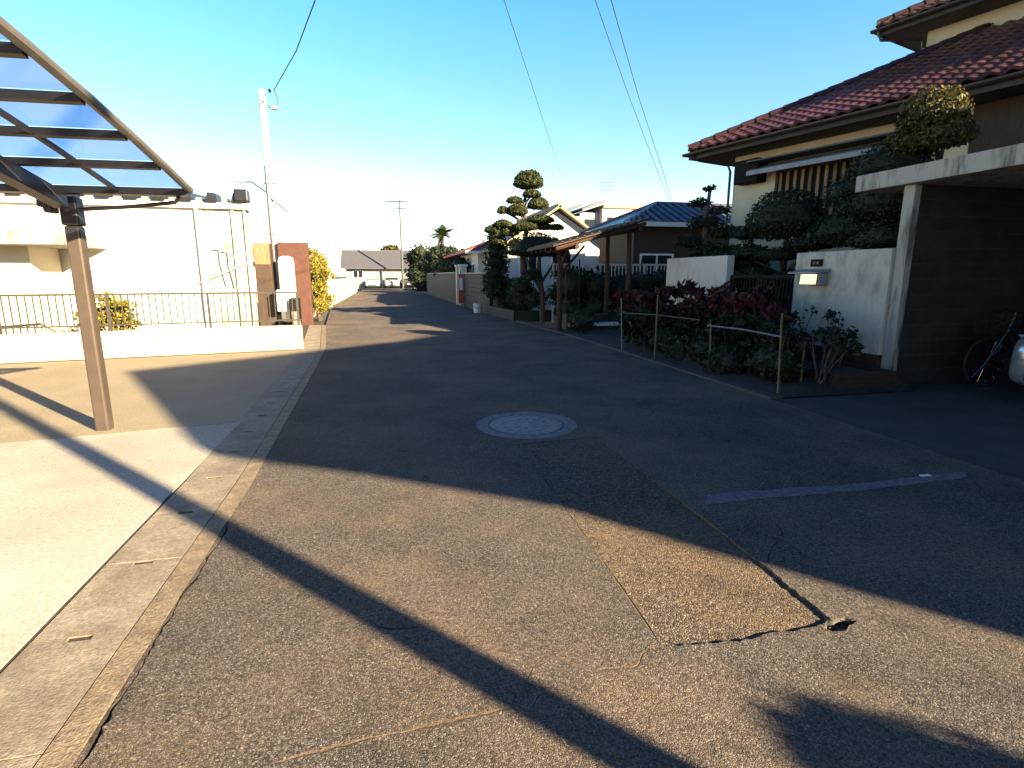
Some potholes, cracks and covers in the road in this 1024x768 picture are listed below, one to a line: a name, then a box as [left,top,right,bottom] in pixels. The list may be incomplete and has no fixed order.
crack [269,647,659,765]
pothole [823,617,857,631]
manhole cover [476,412,577,439]
crack [764,517,850,566]
